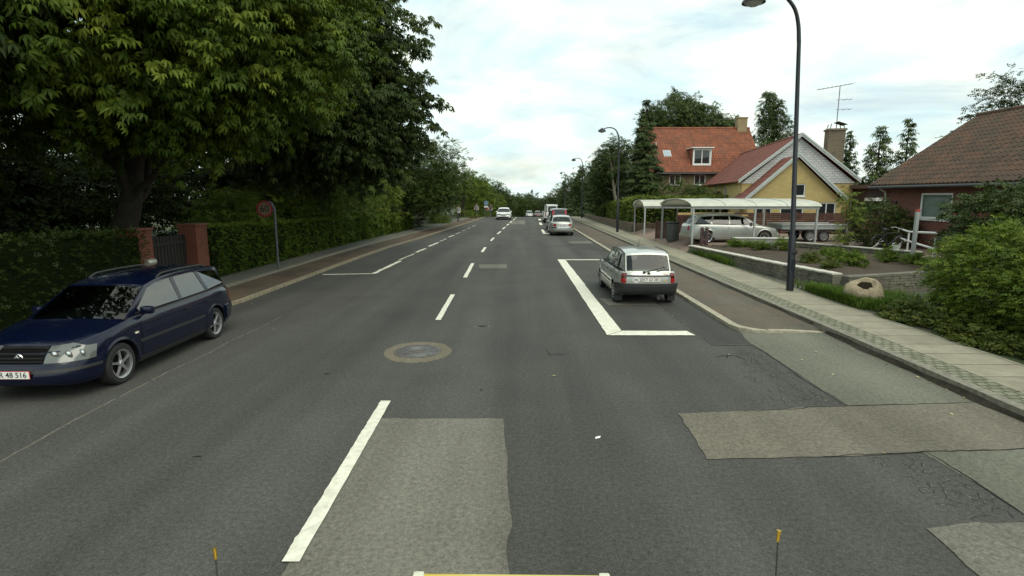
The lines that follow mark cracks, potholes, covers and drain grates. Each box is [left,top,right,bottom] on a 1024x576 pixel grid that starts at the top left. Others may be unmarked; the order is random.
crack [718,347,964,411]
crack [839,448,1024,519]
manhole cover [383,342,452,363]
